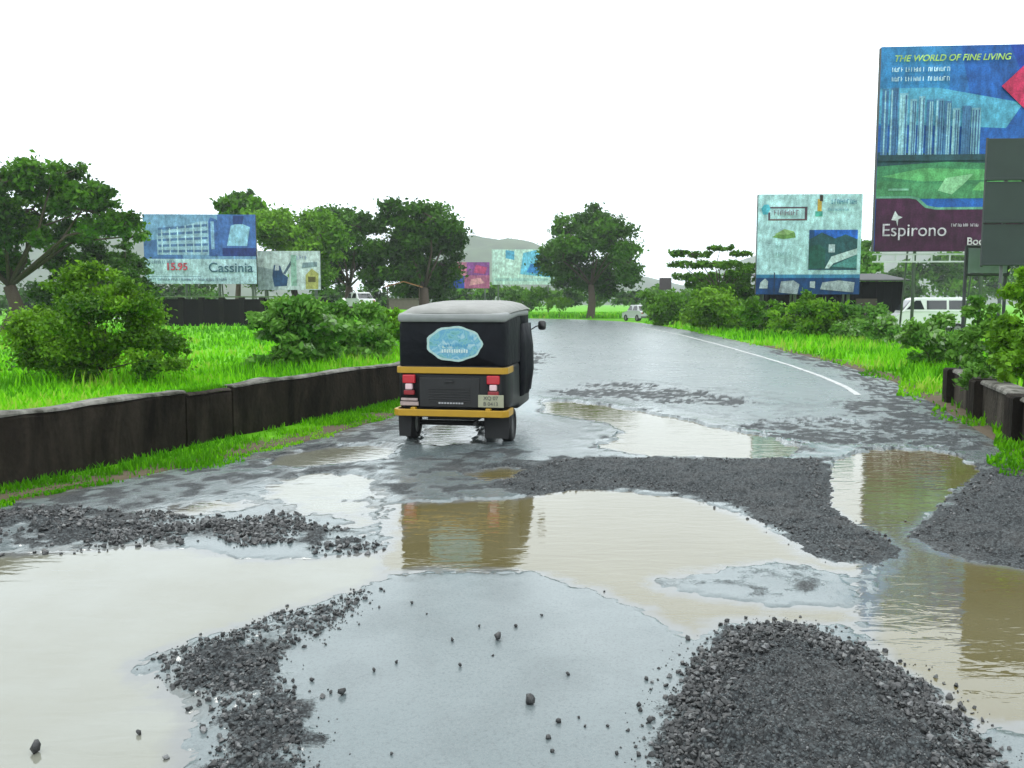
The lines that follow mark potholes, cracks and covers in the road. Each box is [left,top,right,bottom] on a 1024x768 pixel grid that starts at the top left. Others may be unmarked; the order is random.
pothole [368,485,878,649]
pothole [826,446,1024,740]
pothole [0,541,403,768]
pothole [540,398,804,459]
